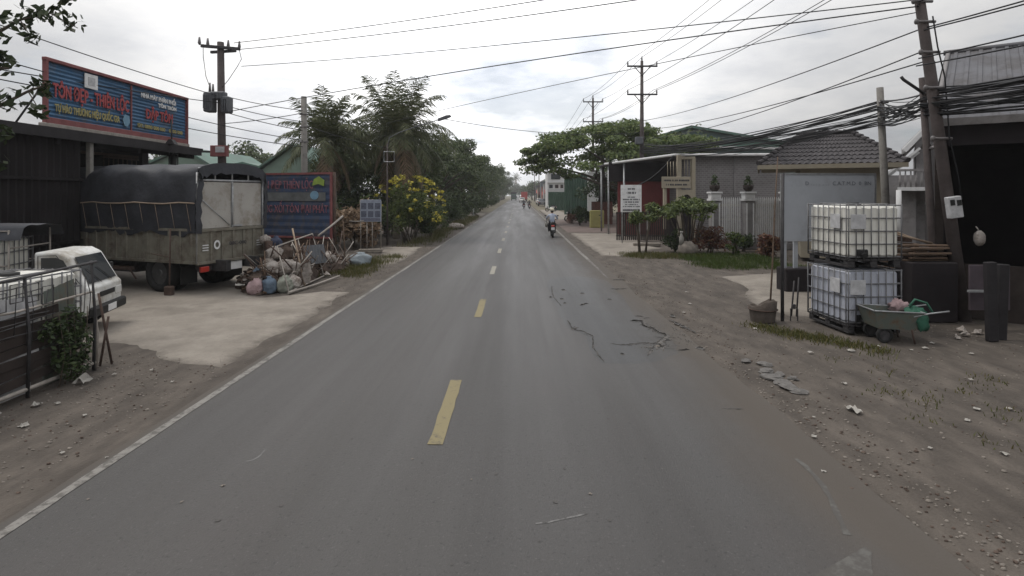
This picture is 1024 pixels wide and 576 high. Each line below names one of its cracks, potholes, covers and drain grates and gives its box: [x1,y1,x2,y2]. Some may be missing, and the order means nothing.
crack [549,284,695,362]
